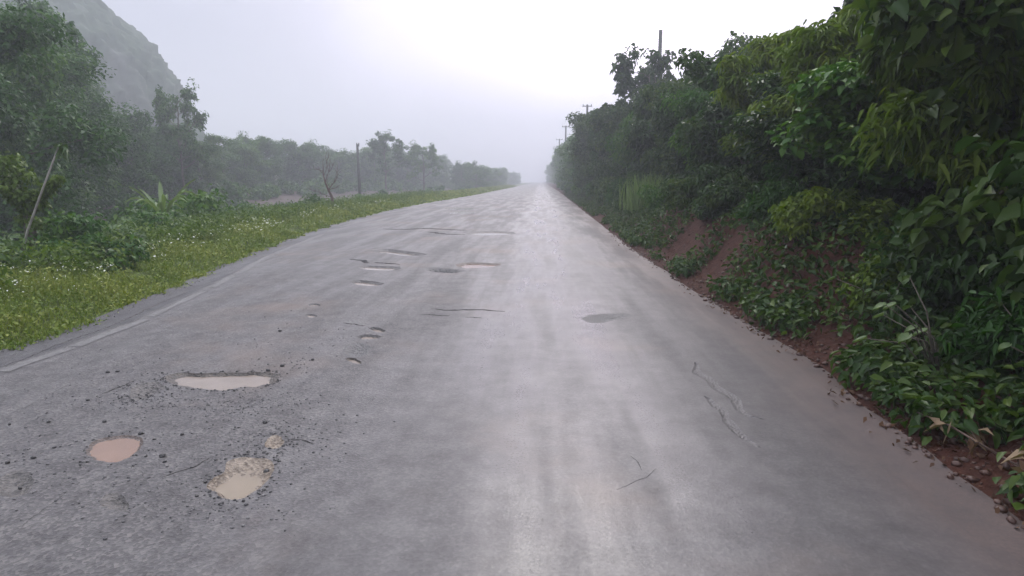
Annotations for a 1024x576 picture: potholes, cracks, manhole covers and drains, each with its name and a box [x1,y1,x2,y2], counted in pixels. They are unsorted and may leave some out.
pothole [164,372,279,391]
pothole [265,435,284,449]
crack [692,362,764,448]
crack [421,309,505,318]
pothole [207,457,274,500]
pothole [86,435,143,462]
